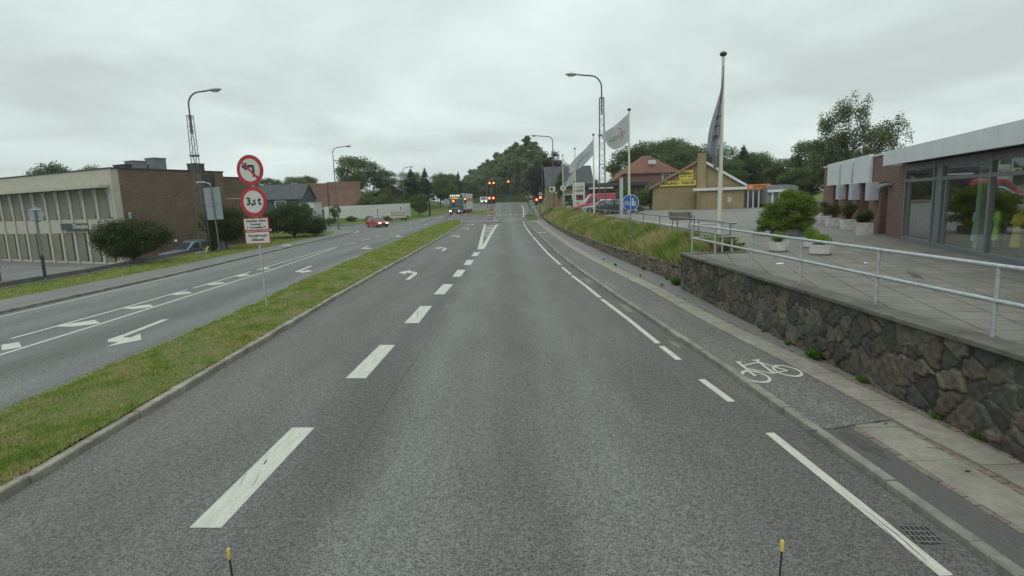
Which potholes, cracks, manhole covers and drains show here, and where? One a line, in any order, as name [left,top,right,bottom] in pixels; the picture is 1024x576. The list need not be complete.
drain grate [890,520,952,550]
